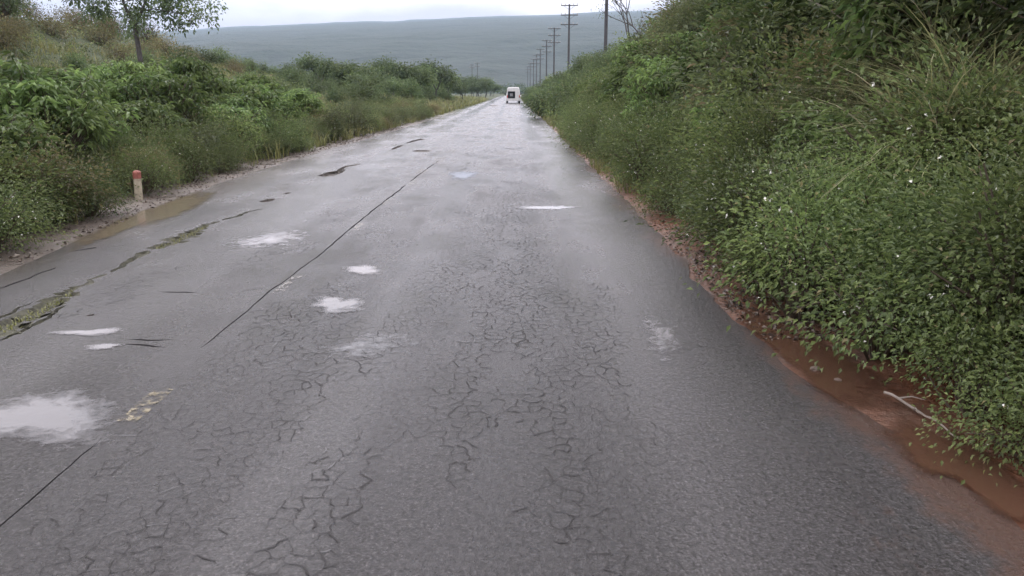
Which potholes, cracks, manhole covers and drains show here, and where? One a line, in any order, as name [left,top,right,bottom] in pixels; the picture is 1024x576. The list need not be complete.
pothole [318,164,360,177]
crack [0,161,441,576]
crack [227,181,709,576]
